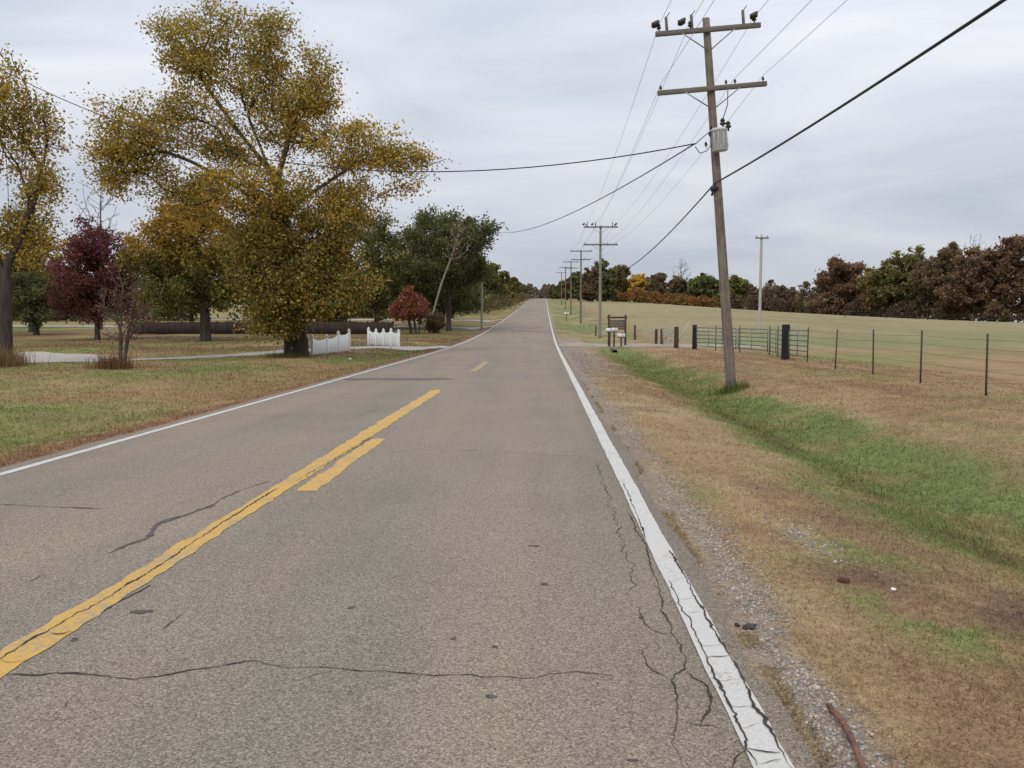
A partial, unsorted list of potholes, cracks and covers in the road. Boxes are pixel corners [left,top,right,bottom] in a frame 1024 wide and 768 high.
crack [3,659,609,680]
crack [595,461,792,768]
